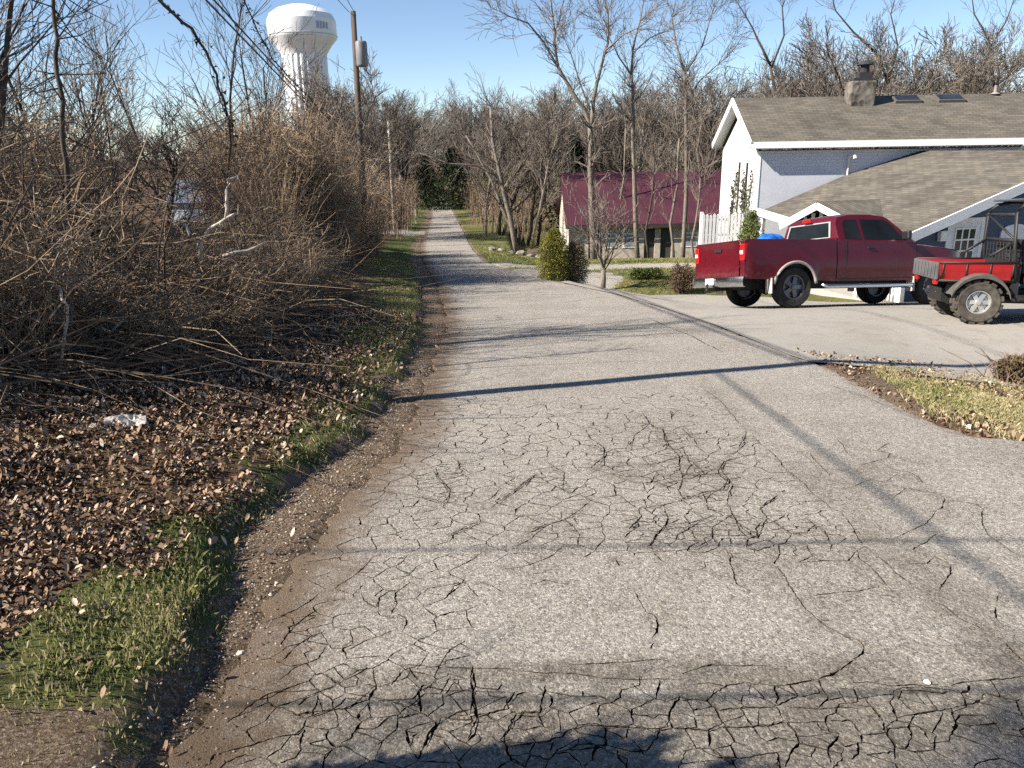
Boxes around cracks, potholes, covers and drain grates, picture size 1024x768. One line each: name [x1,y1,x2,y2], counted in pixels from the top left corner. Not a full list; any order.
crack [209,393,1024,768]
